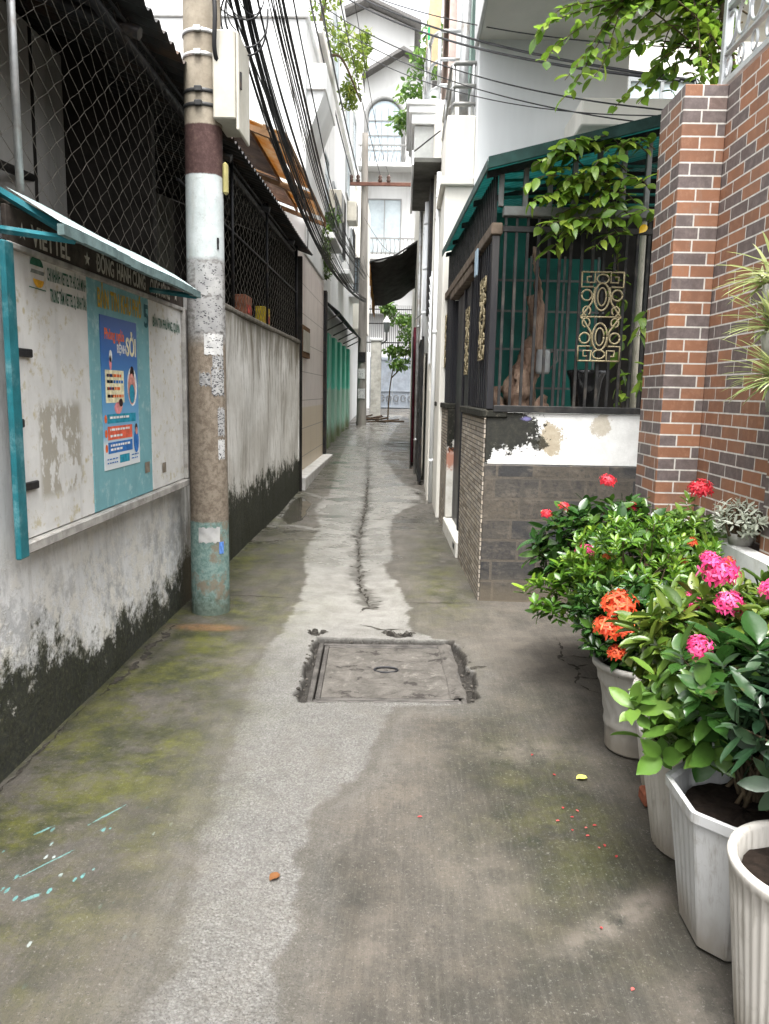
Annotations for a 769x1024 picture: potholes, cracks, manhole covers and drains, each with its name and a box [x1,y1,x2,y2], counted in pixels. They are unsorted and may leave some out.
crack [350,478,399,631]
manhole cover [296,640,477,704]
